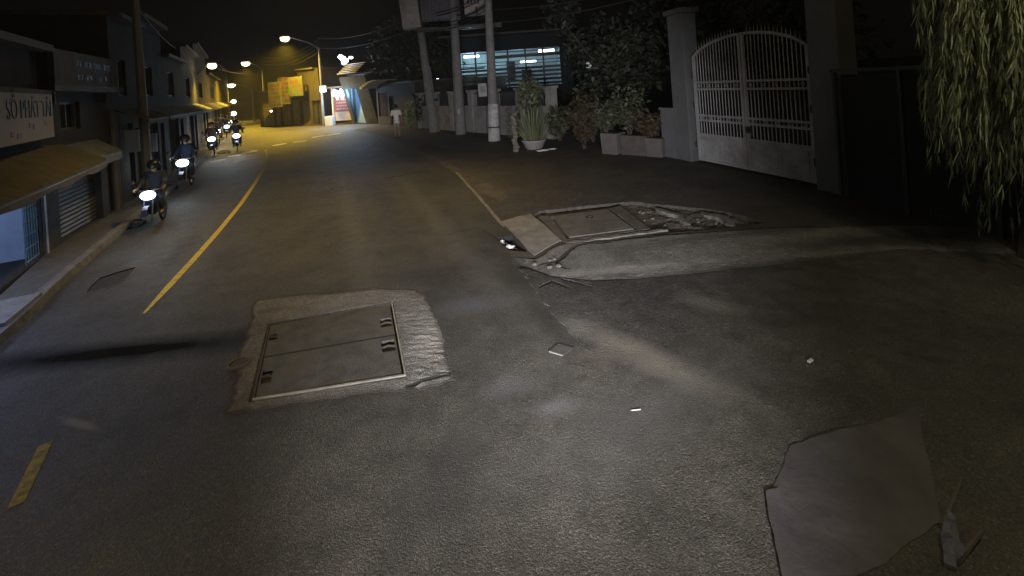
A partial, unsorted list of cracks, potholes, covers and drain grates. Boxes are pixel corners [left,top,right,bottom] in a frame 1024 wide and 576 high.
utility cover [227,356,251,372]
utility cover [539,206,650,243]
pothole [533,202,764,243]
crack [531,241,612,289]
manhole cover [224,287,456,415]
